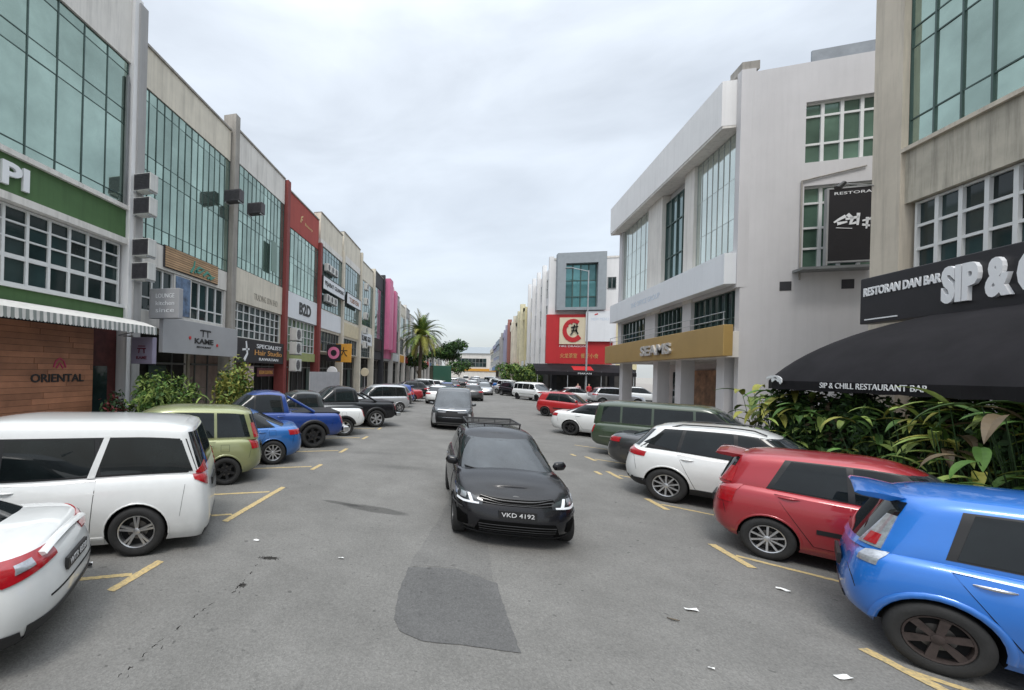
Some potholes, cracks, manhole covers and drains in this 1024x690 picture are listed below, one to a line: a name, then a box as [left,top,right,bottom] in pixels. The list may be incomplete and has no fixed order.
crack [118,557,264,677]
